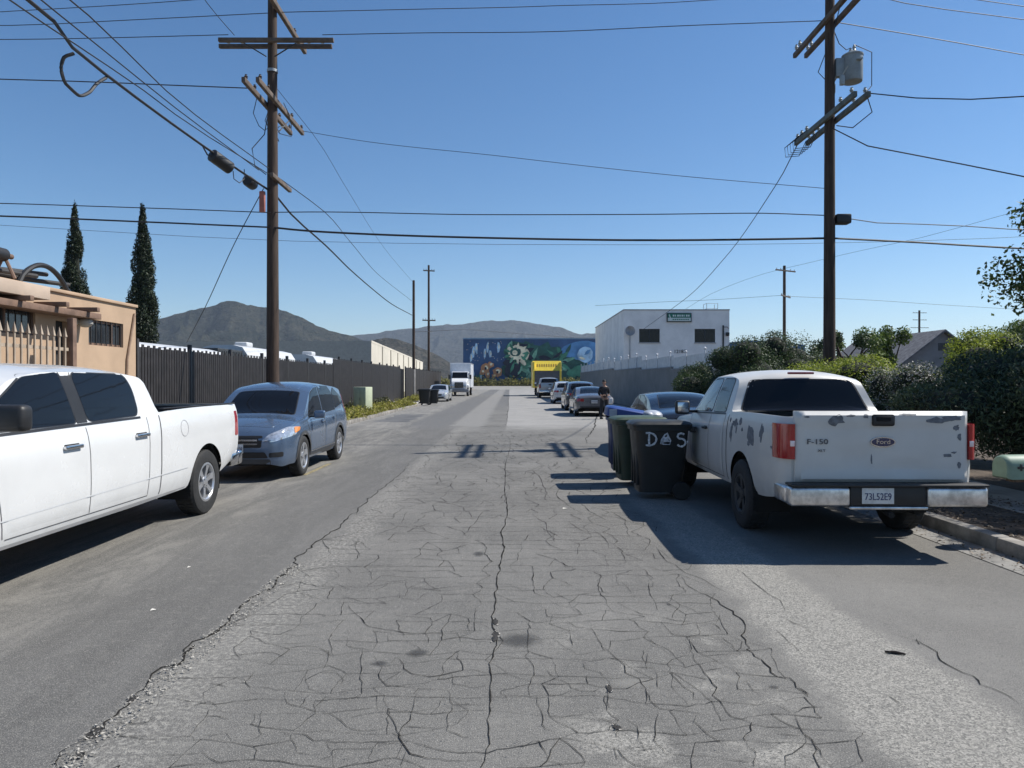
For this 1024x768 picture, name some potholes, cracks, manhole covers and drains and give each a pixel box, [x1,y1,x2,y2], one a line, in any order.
crack [113,414,863,768]
crack [898,635,1017,702]
